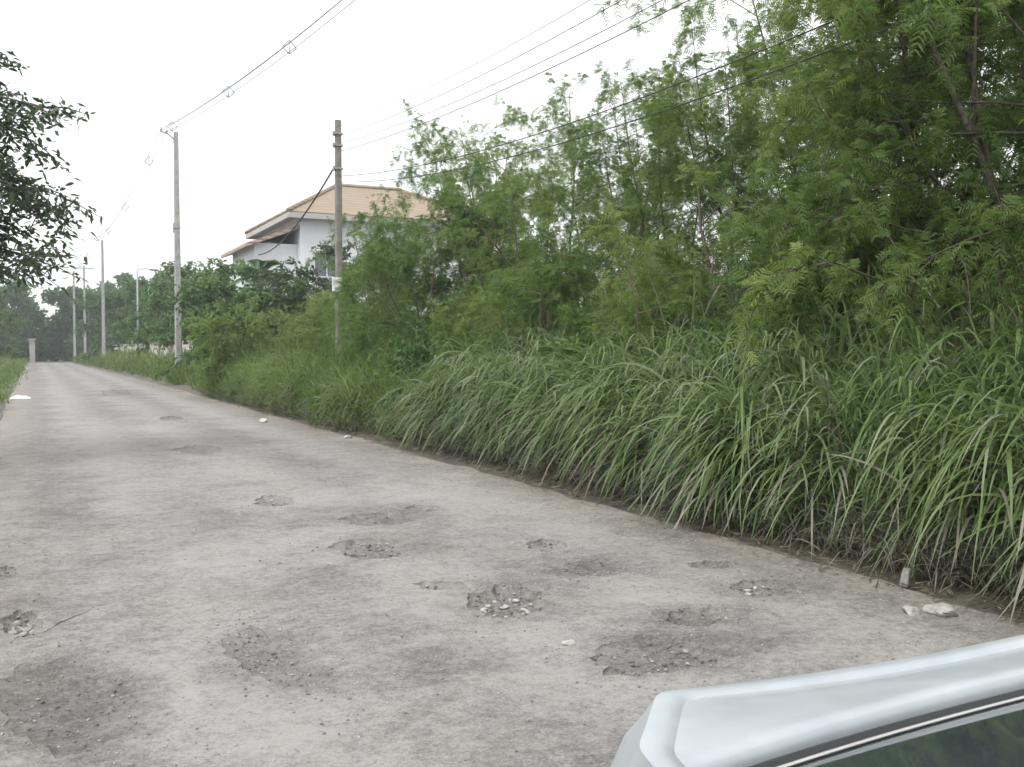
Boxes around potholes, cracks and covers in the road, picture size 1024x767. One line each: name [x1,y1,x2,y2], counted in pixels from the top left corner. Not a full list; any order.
pothole [171,445,223,455]
pothole [254,495,295,507]
pothole [337,512,414,526]
pothole [687,560,739,569]
pothole [328,538,421,560]
pothole [728,579,796,596]
pothole [412,580,465,590]
pothole [589,633,727,678]
pothole [0,653,145,759]
pothole [0,610,44,637]
pothole [220,625,314,693]
pothole [466,582,548,619]
